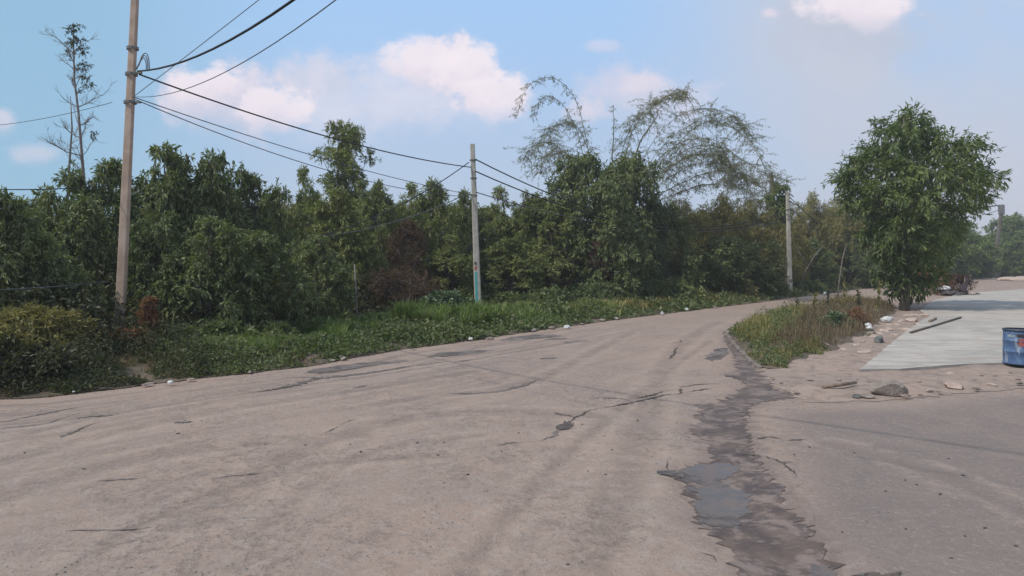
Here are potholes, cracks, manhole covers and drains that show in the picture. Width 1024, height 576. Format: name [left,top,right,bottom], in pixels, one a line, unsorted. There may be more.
crack [492,383,727,448]
pothole [556,420,574,430]
